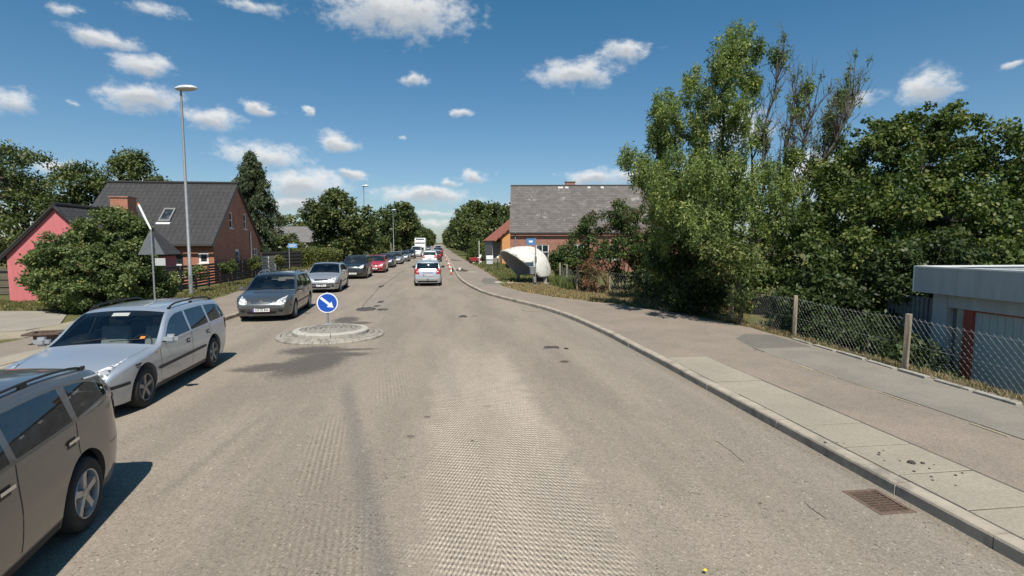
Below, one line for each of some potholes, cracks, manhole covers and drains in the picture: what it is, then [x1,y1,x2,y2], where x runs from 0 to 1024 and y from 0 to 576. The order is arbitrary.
drain grate [842,489,917,515]
